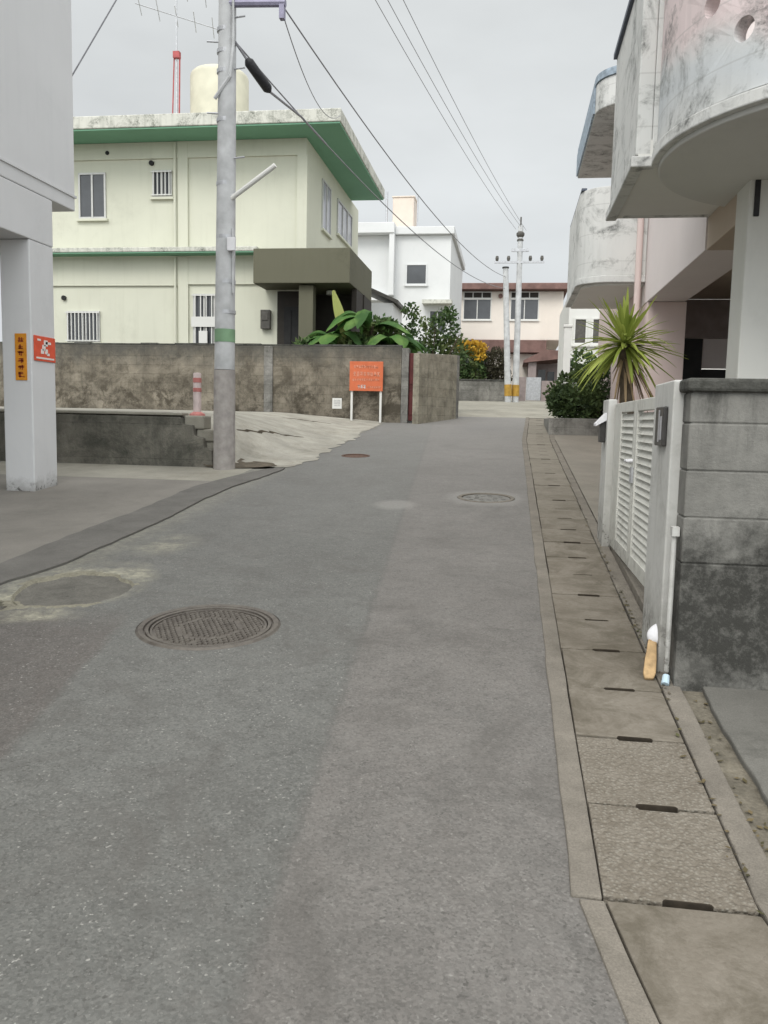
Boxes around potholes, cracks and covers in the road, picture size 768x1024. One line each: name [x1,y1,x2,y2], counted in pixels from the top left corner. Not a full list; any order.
crack [237,418,330,437]
manhole cover [457,493,515,503]
manhole cover [135,604,281,651]
